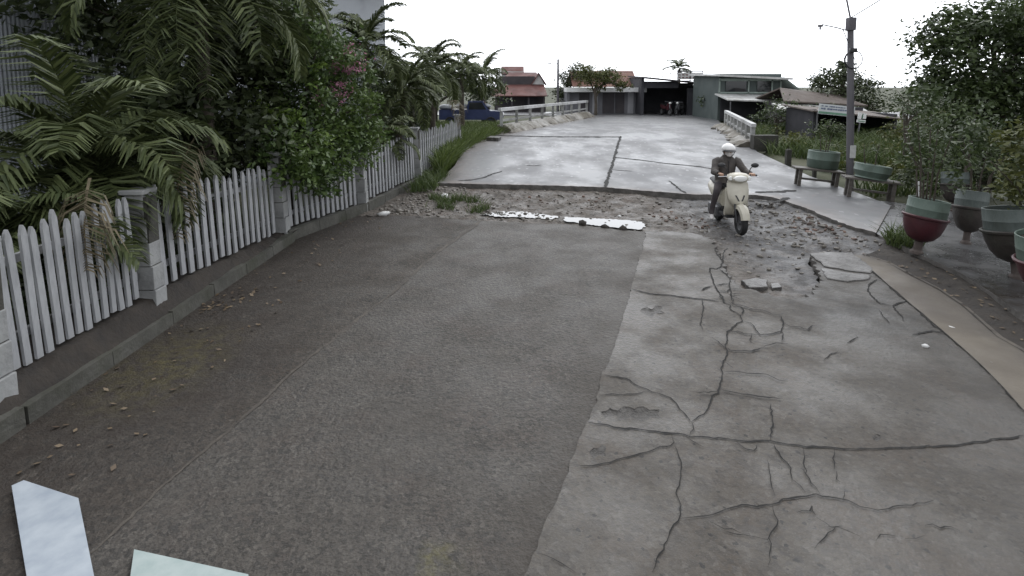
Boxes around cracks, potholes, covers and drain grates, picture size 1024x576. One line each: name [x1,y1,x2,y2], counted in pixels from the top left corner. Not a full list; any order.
crack [575,248,1023,572]
crack [496,135,711,193]
pothole [357,186,896,299]
